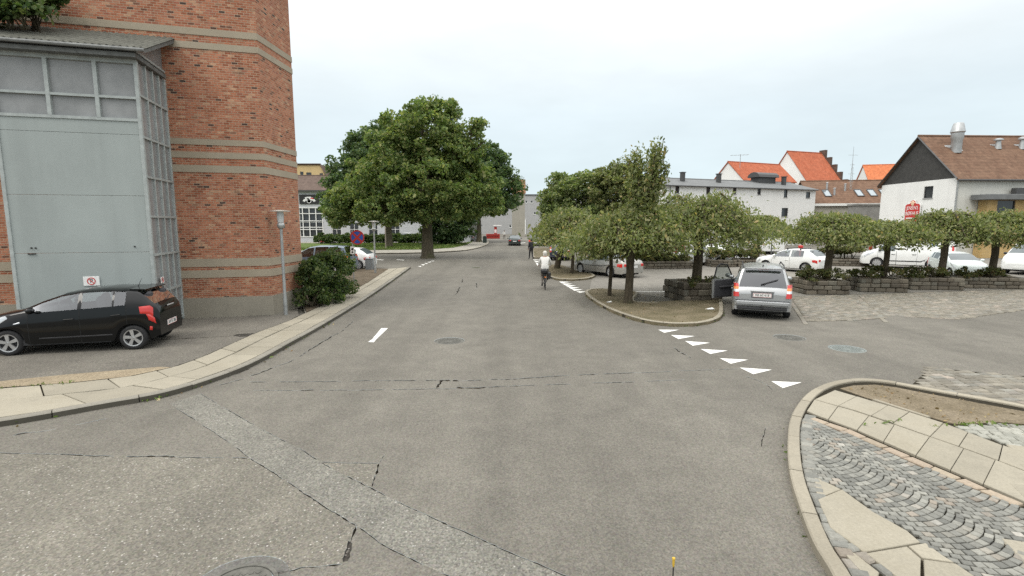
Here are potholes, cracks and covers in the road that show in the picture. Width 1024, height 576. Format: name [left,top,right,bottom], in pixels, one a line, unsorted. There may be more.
crack [5,408,449,576]
crack [201,394,566,576]
manhole cover [204,556,290,576]
manhole cover [828,345,867,353]
